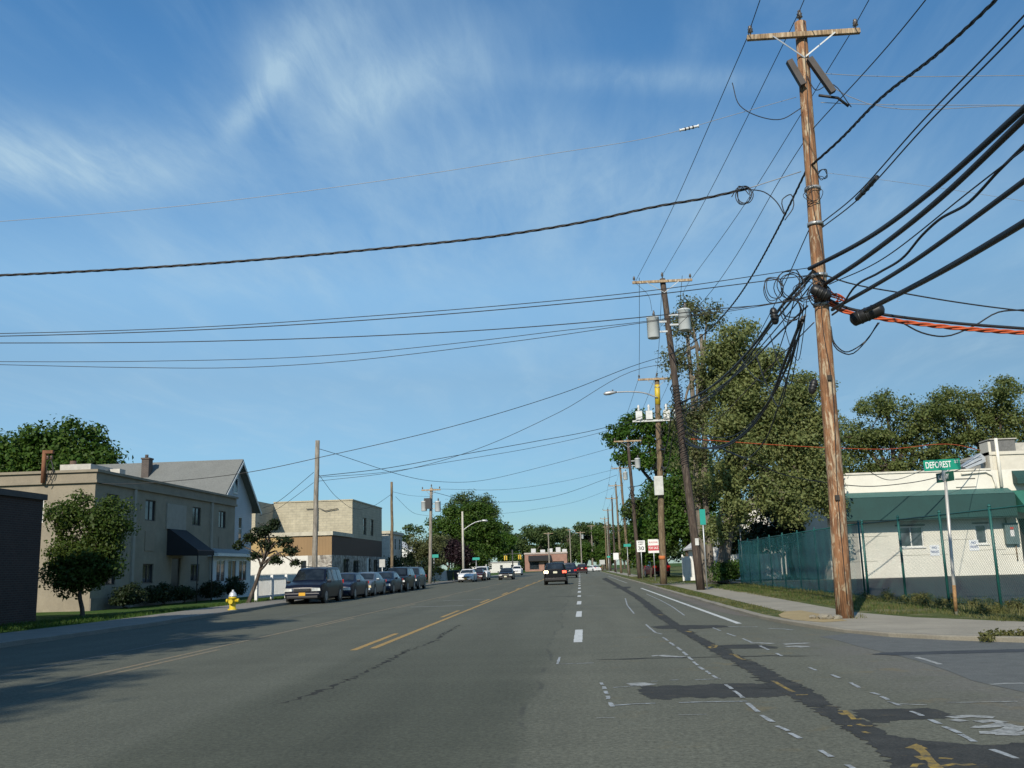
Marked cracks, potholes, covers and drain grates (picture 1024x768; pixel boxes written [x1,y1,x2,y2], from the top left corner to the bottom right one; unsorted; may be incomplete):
crack [273,625,460,705]
